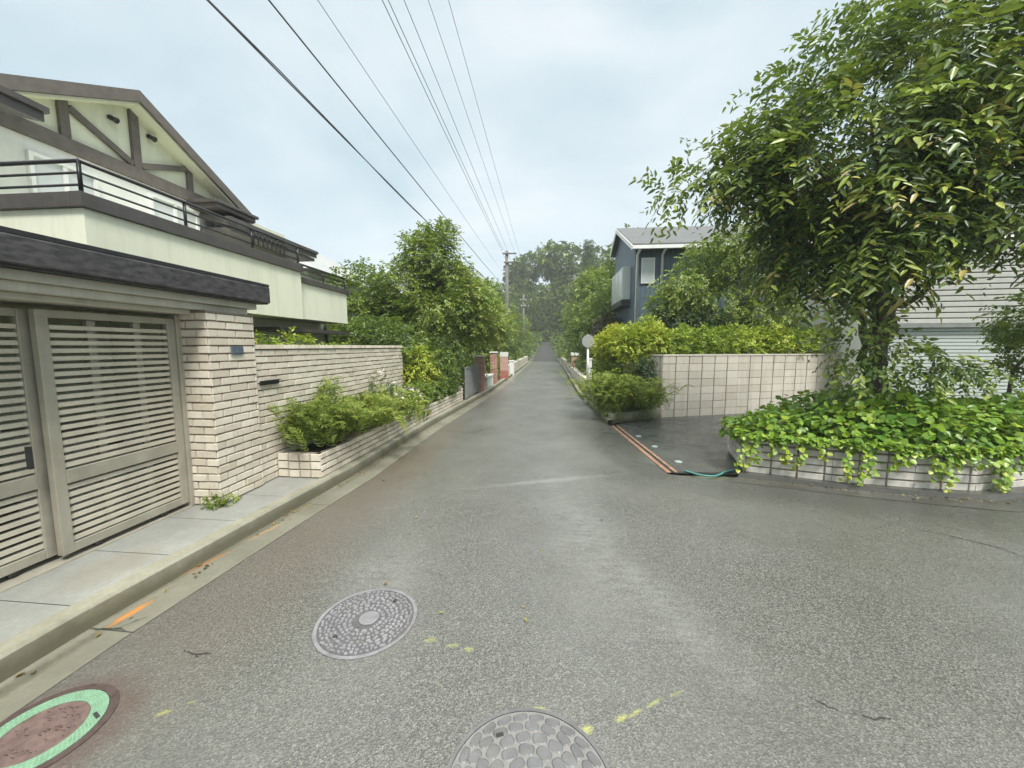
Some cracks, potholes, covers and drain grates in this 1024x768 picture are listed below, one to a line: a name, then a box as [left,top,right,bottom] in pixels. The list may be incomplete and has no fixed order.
manhole cover [312,588,417,660]
manhole cover [0,684,120,768]
crack [808,696,891,720]
manhole cover [446,707,610,768]
